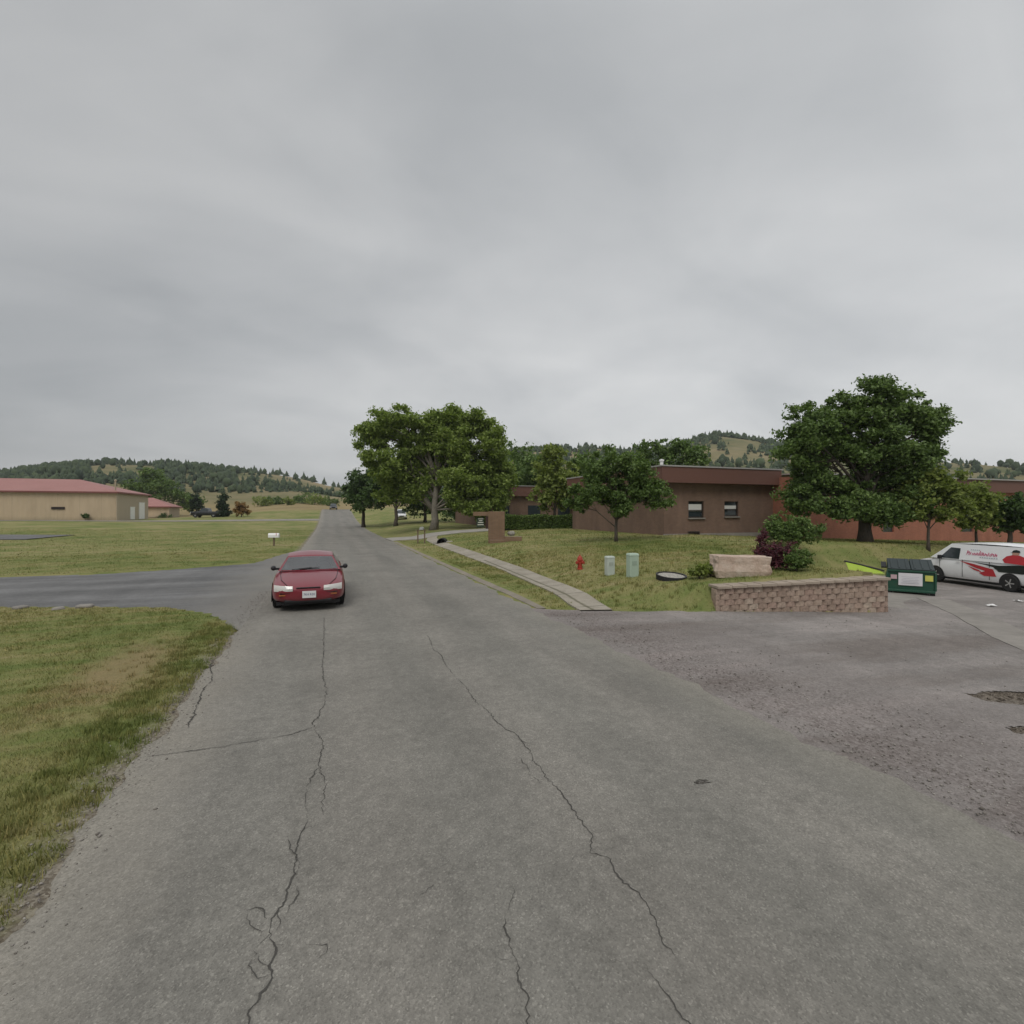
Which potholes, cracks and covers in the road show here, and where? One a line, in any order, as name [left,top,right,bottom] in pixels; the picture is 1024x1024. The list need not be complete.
crack [429,639,691,1024]
crack [145,618,327,1024]
pothole [967,691,1024,705]
